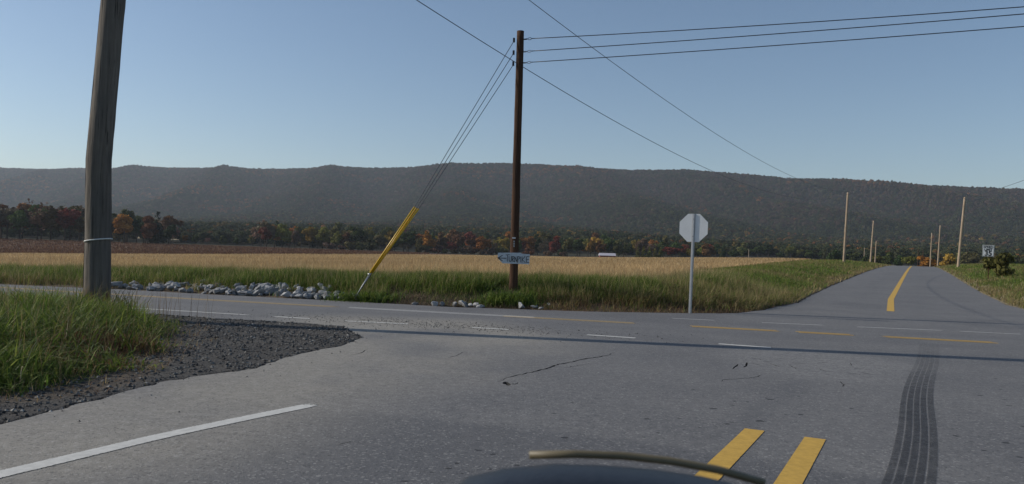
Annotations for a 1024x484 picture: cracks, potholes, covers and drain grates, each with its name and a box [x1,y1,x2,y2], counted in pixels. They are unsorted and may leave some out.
crack [721,358,872,386]
crack [492,352,613,383]
